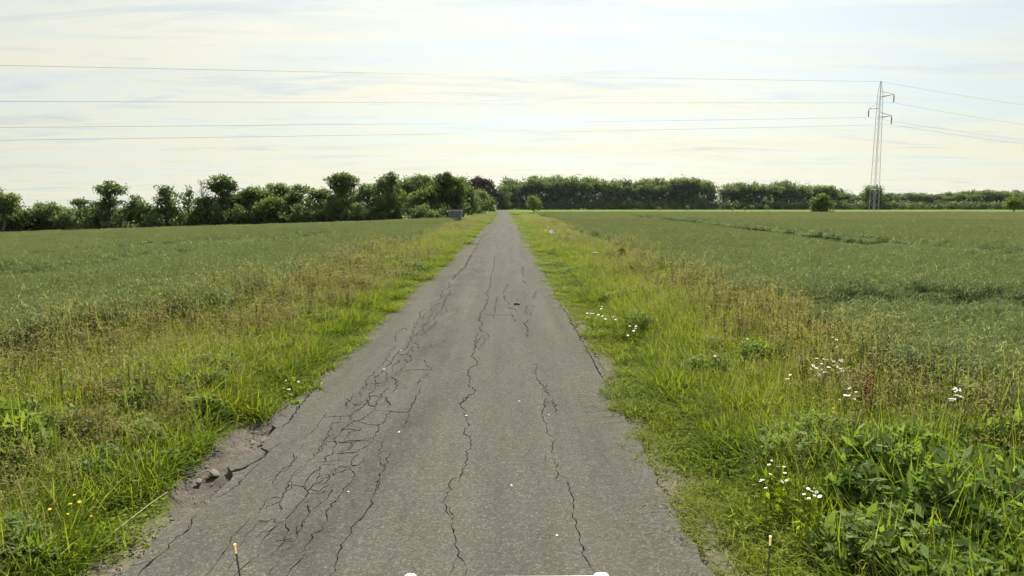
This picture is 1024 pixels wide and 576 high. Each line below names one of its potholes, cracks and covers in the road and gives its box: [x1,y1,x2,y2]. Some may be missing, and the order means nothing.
crack [452,233,487,280]
crack [534,364,596,572]
crack [443,257,537,575]
crack [206,283,451,576]
